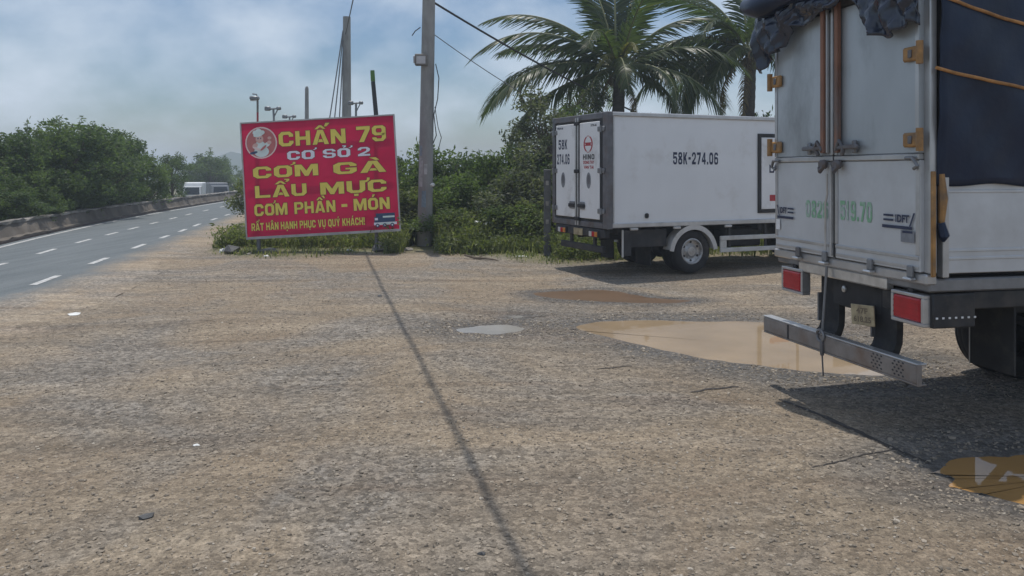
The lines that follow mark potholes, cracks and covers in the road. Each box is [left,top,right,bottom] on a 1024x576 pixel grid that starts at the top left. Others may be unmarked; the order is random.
pothole [569,319,889,377]
pothole [527,288,700,304]
